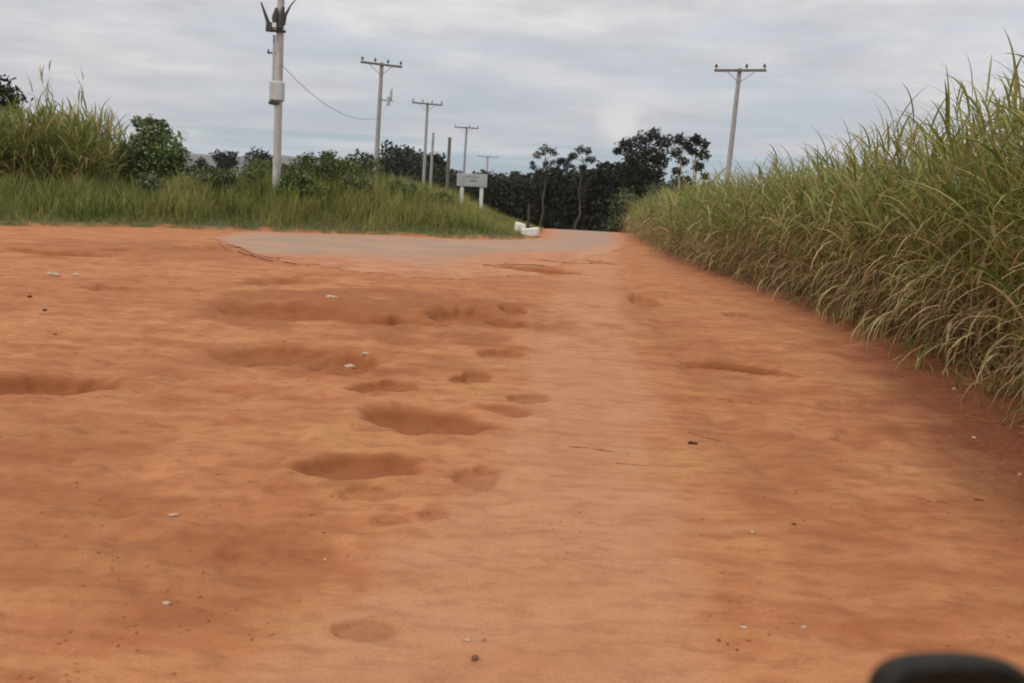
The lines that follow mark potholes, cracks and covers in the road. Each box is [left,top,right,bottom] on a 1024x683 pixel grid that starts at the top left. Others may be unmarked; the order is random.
pothole [353,405,511,436]
pothole [445,370,495,385]
pothole [502,393,554,405]
pothole [336,313,456,327]
pothole [280,452,429,481]
pothole [486,265,599,276]
pothole [483,317,536,329]
pothole [203,343,340,371]
pothole [626,293,664,308]
pothole [447,464,502,492]
pothole [421,306,501,325]
pothole [497,303,530,315]
